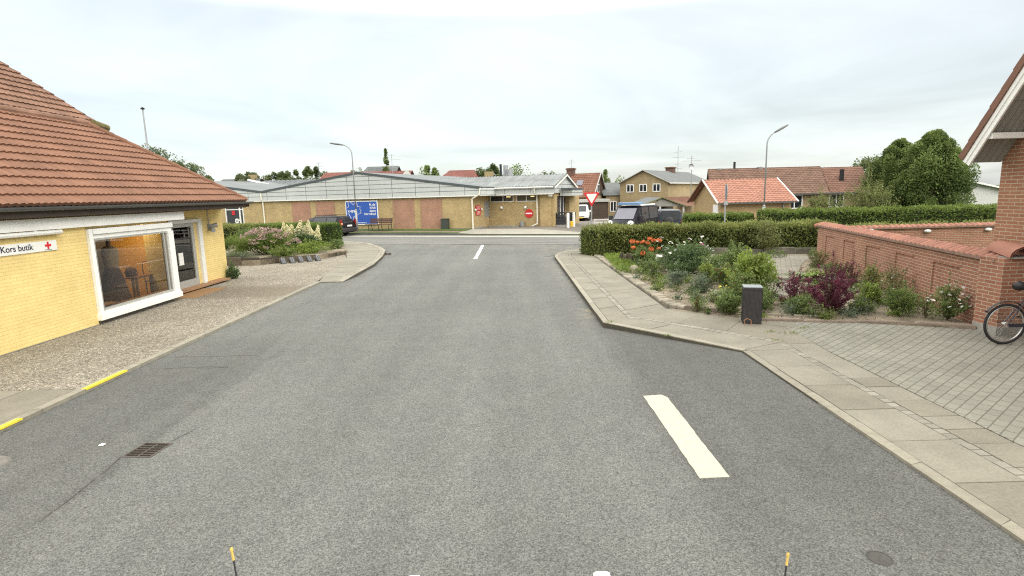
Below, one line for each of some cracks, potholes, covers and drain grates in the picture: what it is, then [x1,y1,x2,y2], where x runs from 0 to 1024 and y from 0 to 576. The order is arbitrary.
drain grate [121,442,173,458]
manhole cover [866,550,894,566]
